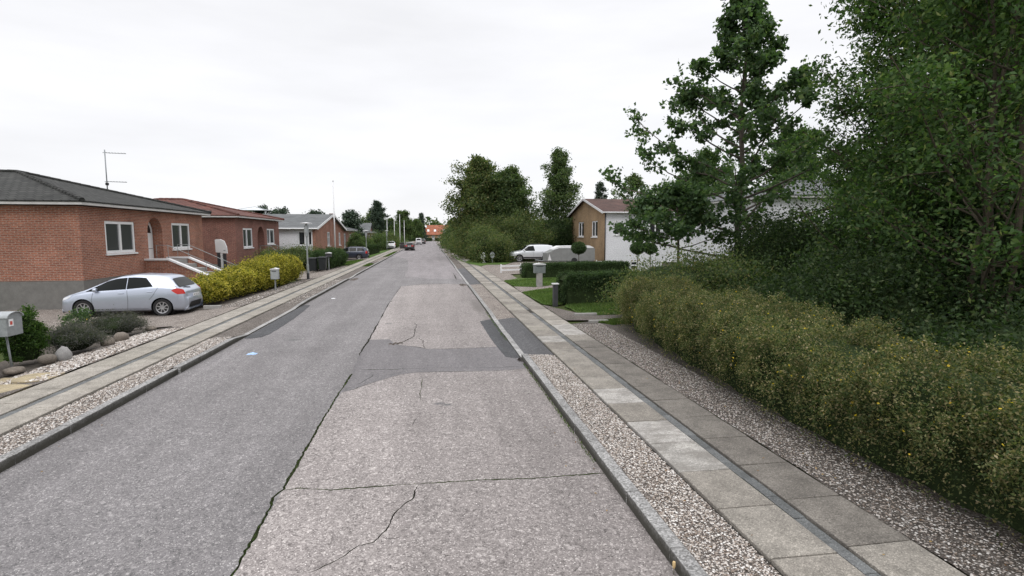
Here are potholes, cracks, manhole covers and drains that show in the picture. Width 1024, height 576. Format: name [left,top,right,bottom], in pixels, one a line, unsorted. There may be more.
crack [340,366,519,425]
crack [287,473,604,572]
